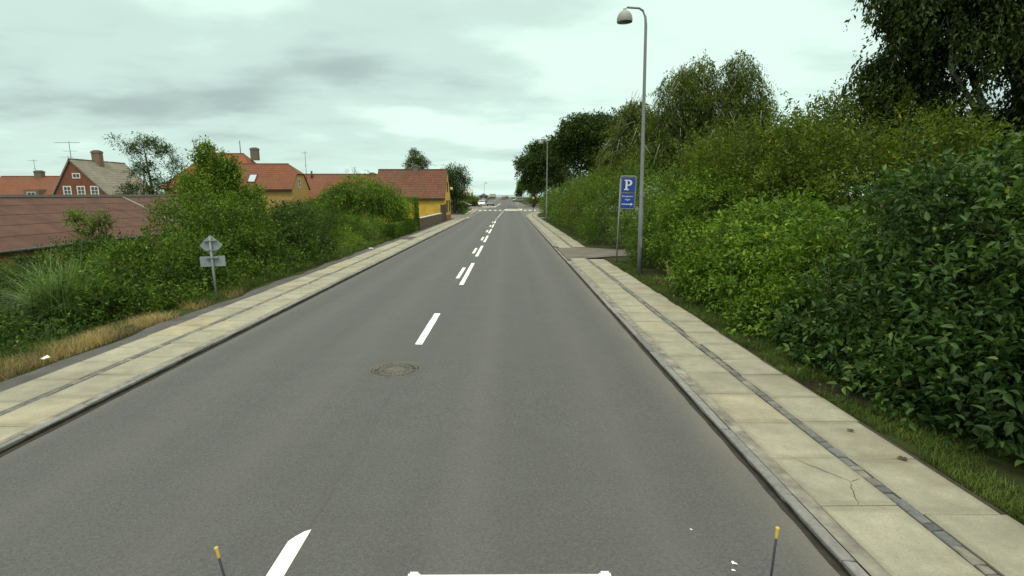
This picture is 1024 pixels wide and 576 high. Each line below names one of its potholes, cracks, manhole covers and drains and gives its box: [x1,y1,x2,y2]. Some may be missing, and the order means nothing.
manhole cover [368,361,422,378]
